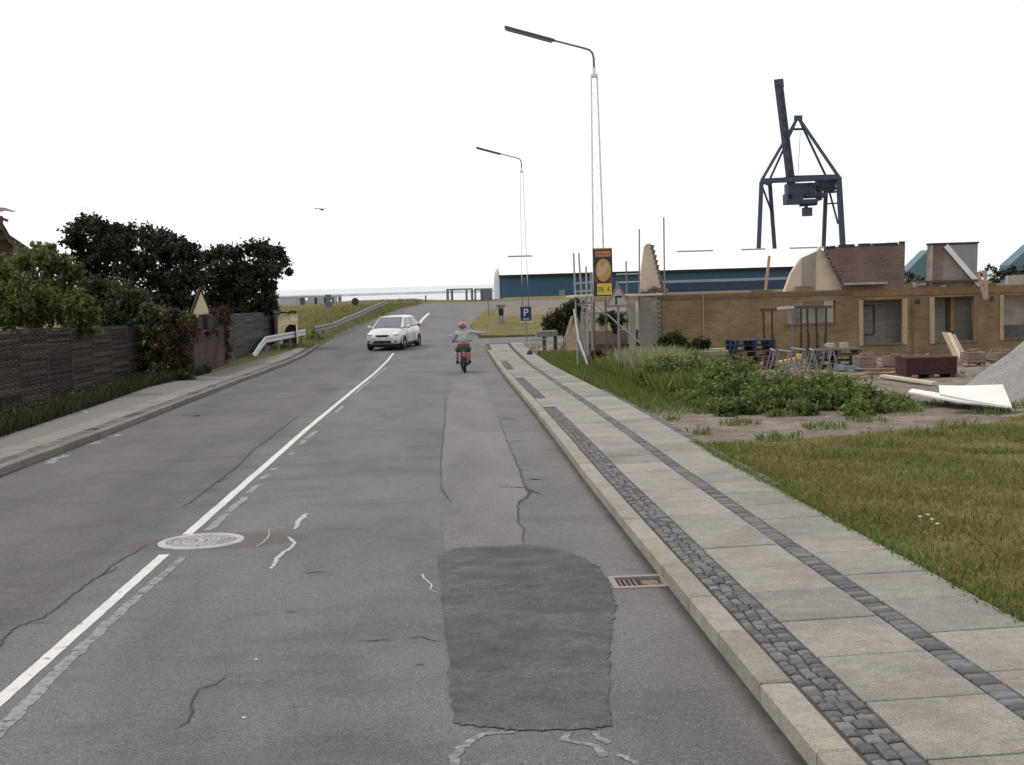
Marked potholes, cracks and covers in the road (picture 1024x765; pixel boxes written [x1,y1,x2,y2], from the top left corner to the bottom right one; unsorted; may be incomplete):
crack [440,403,452,503]
crack [497,417,544,542]
manhole cover [157,533,245,550]
crack [179,677,224,727]
